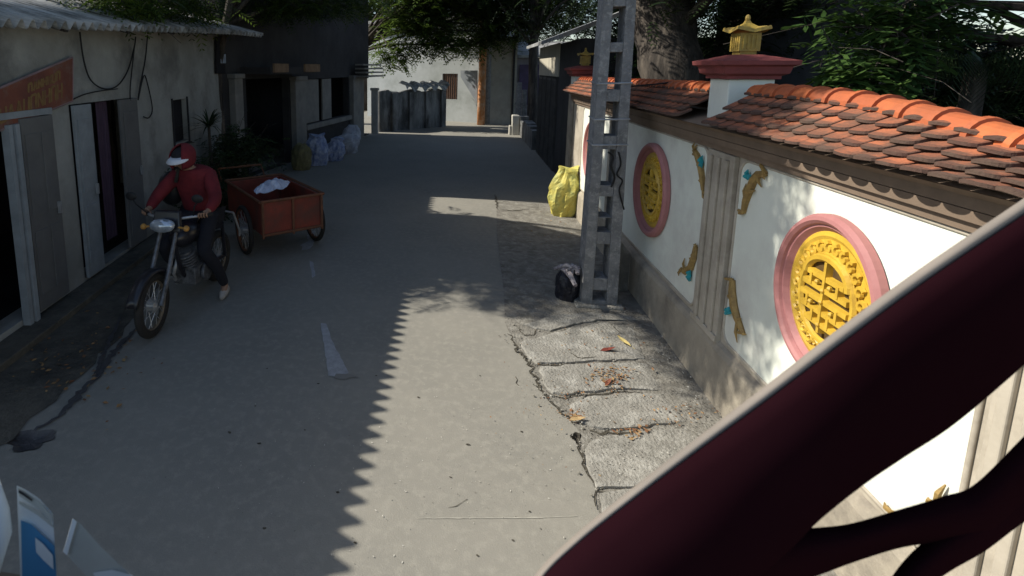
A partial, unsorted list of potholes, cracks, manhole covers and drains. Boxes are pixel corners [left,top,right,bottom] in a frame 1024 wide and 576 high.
crack [498,324,642,508]
